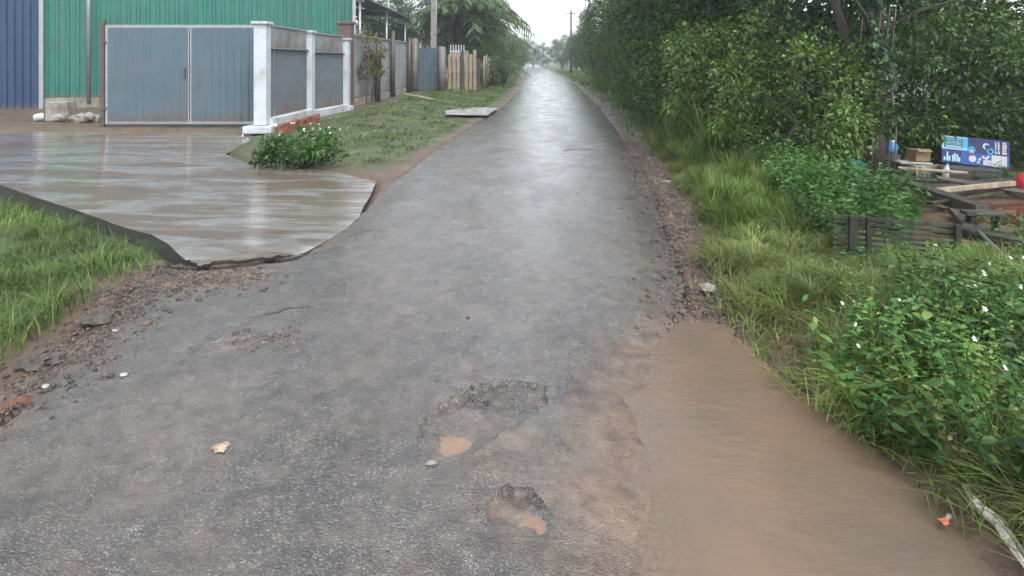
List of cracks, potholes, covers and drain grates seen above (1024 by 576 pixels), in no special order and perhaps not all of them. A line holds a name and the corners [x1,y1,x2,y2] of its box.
pothole [415,378,548,463]
pothole [186,332,277,356]
pothole [484,483,568,546]
crack [253,306,315,318]
